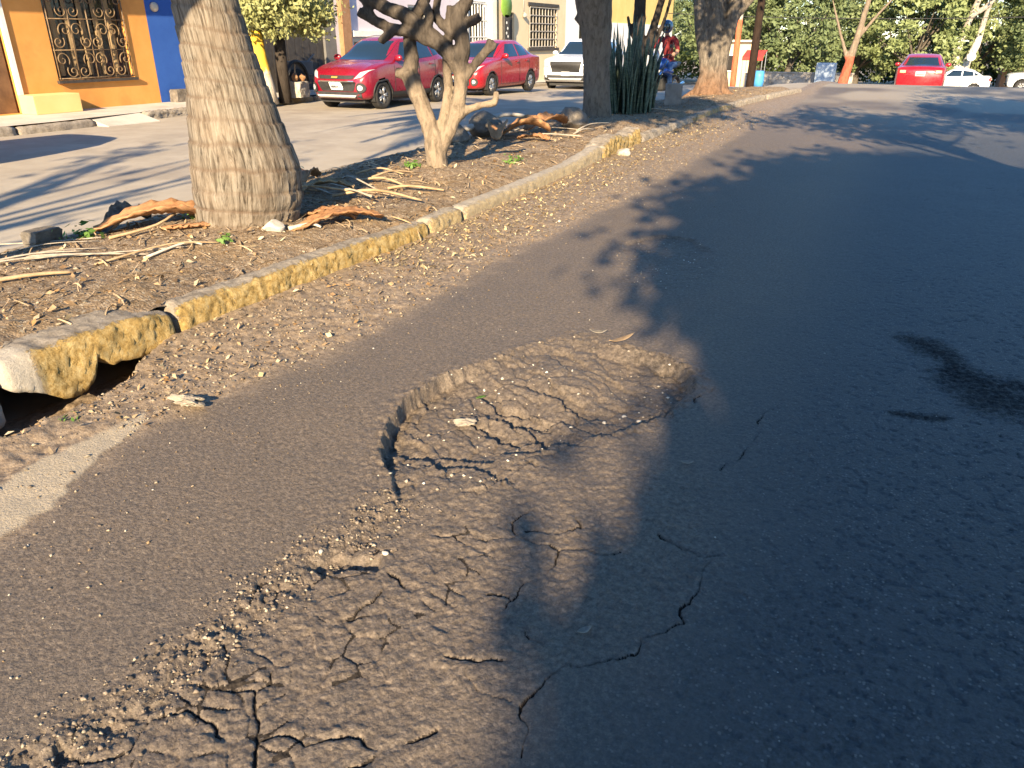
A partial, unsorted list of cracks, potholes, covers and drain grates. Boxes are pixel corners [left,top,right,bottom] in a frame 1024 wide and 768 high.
crack [518,535,699,759]
pothole [379,336,694,504]
crack [67,515,621,768]
